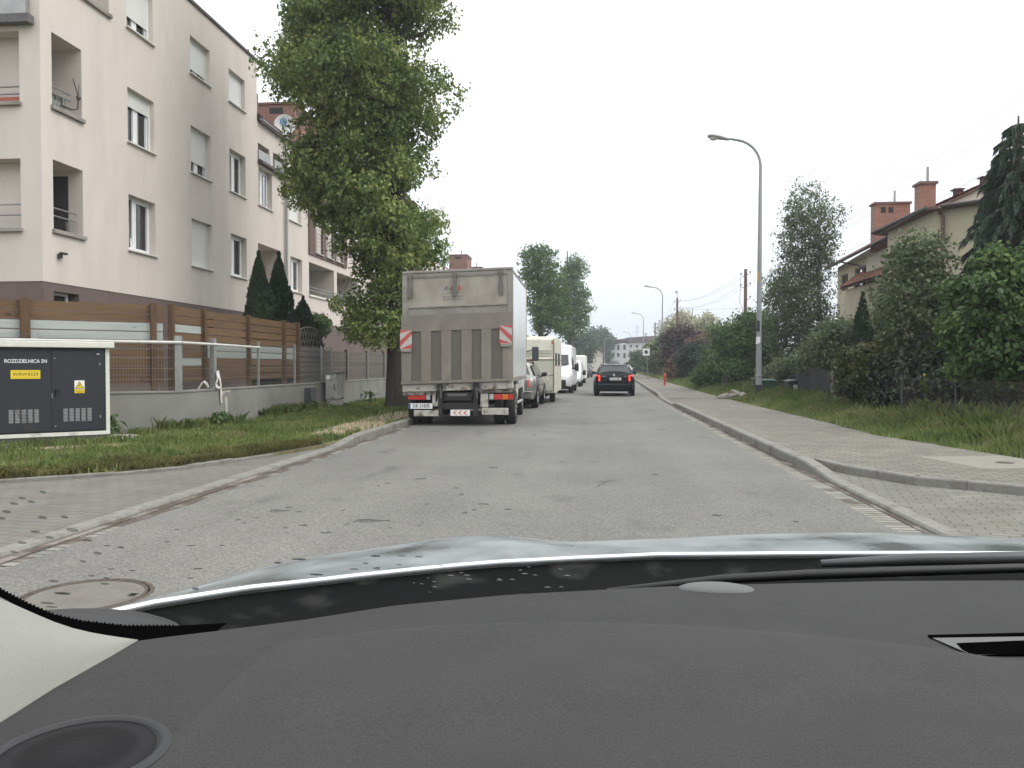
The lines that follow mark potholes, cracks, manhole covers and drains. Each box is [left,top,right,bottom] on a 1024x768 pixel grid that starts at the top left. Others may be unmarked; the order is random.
manhole cover [18,578,155,610]
